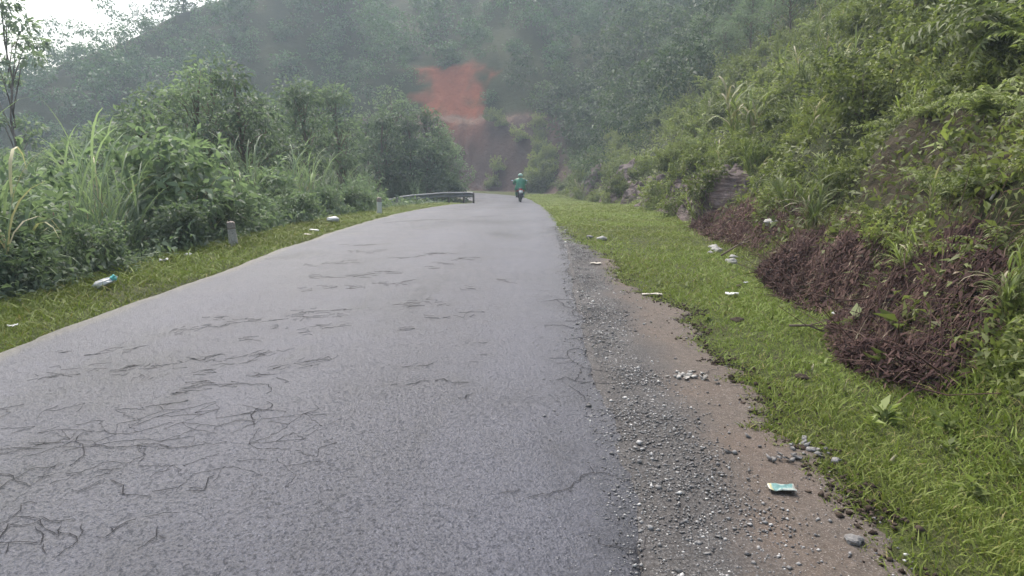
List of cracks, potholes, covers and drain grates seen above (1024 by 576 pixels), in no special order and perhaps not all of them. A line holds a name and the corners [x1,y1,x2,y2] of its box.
crack [299,244,512,331]
crack [0,308,349,516]
crack [0,501,135,556]
crack [502,465,610,497]
crack [550,298,612,400]
